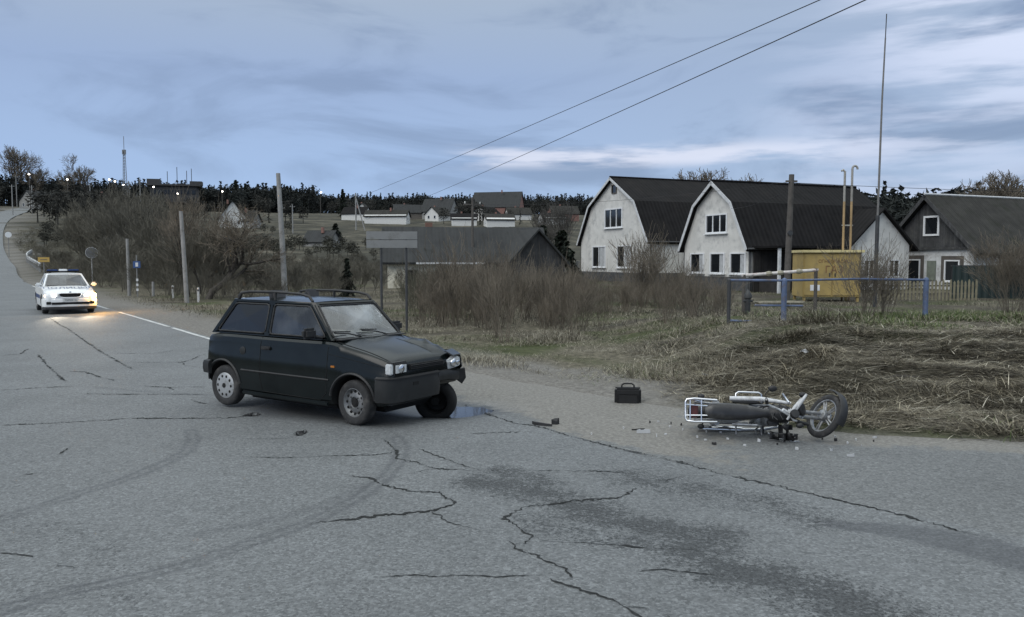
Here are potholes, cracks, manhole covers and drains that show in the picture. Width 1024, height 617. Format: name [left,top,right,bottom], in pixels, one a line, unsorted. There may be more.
crack [5,319,240,425]
crack [493,469,696,617]
crack [272,439,481,529]
